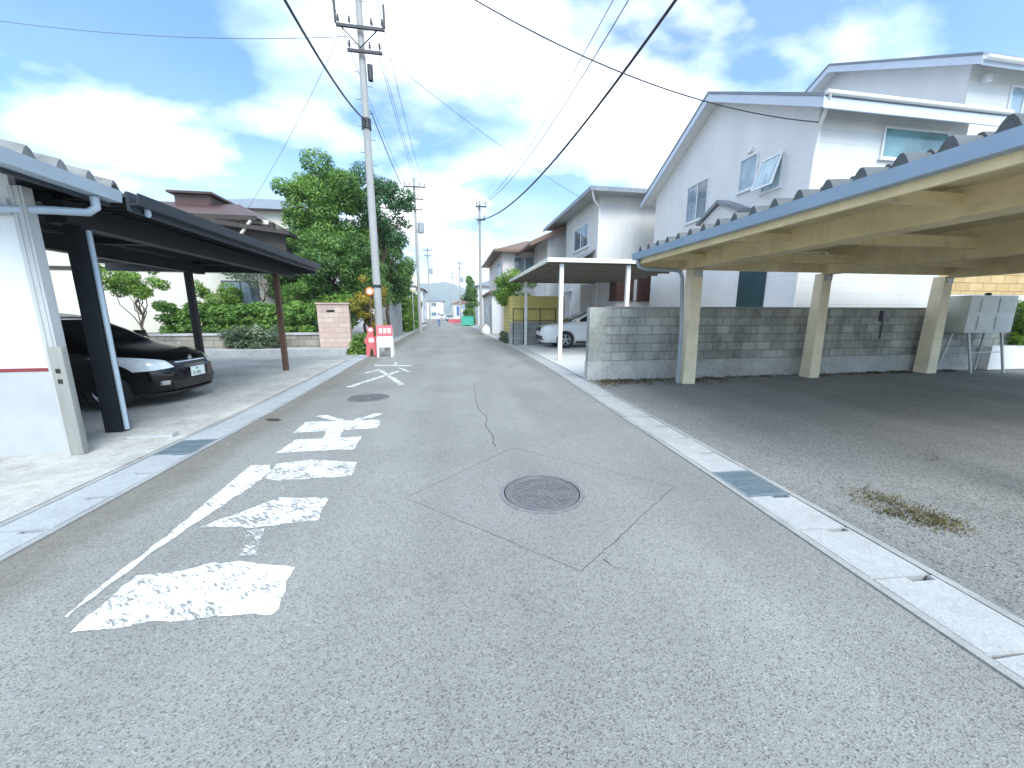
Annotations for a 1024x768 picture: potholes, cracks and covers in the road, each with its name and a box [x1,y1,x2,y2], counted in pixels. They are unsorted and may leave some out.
manhole cover [347,393,390,402]
manhole cover [500,474,584,514]
drain grate [711,470,788,498]
drain grate [154,439,217,455]
